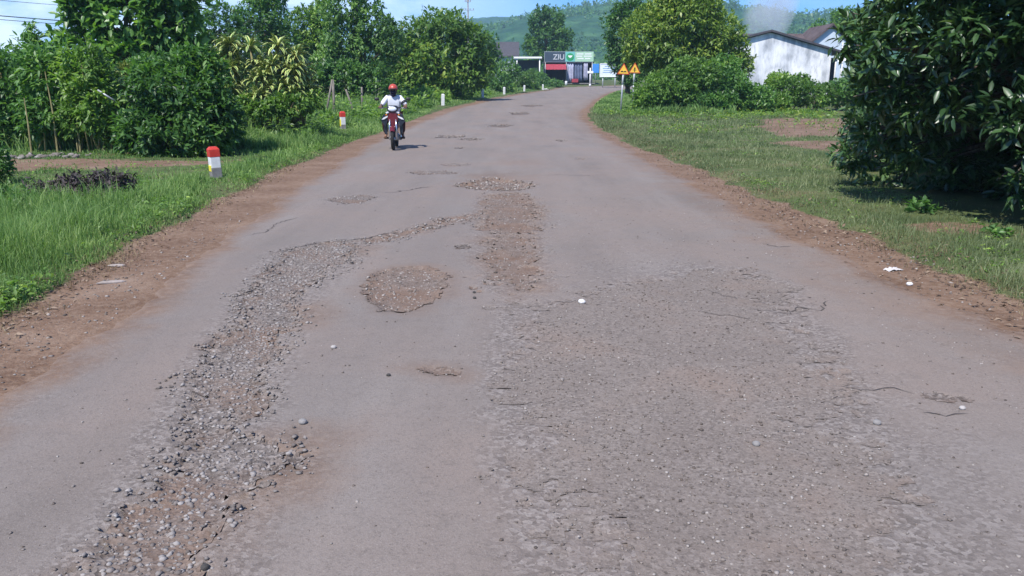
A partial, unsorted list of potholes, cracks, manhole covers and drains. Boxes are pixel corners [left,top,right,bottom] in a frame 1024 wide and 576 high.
pothole [350,212,485,244]
pothole [465,190,569,295]
pothole [453,176,535,191]
crack [698,291,826,322]
pothole [416,366,461,375]
pothole [52,238,376,576]
pothole [327,194,376,205]
pothole [359,265,453,313]
